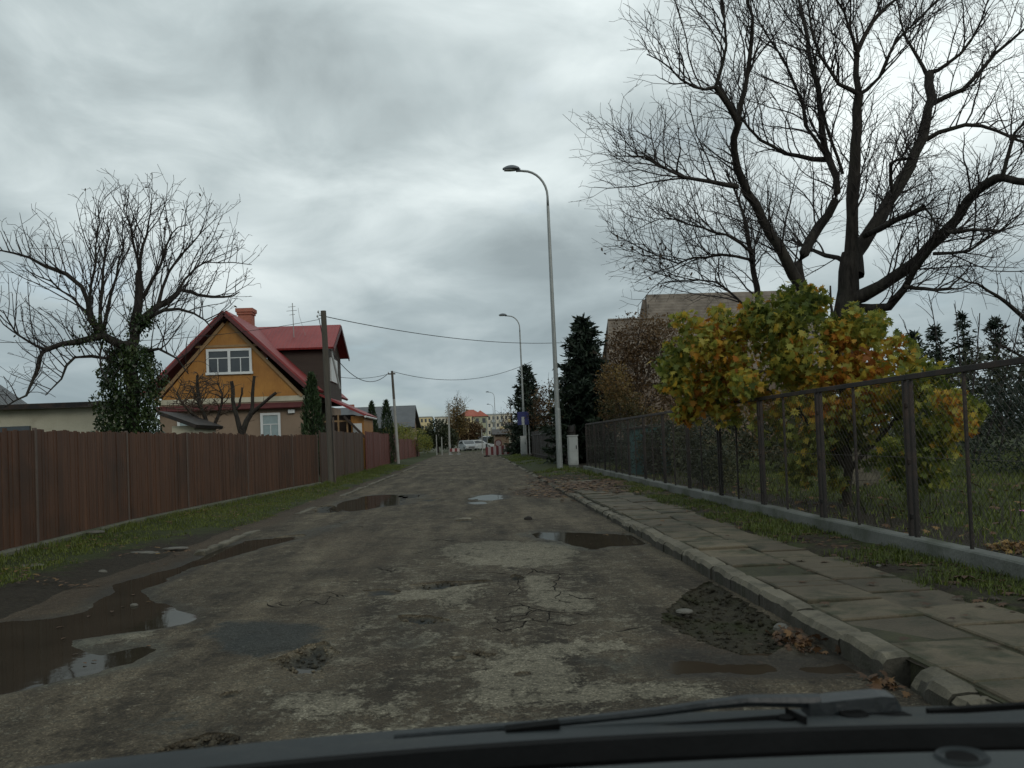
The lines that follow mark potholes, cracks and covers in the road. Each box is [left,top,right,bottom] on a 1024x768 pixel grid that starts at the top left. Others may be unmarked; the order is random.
pothole [268,641,341,674]
pothole [154,732,240,753]
crack [479,569,597,632]
pothole [661,581,791,655]
